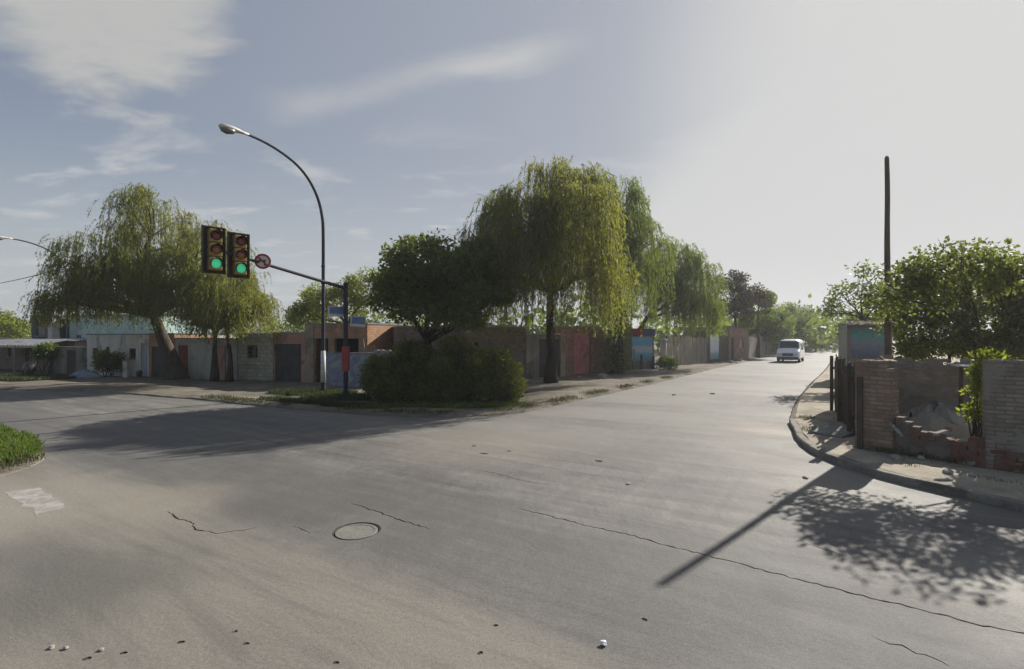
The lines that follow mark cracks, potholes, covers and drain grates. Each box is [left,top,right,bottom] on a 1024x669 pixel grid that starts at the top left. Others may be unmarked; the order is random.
manhole cover [332,522,381,540]
crack [355,504,430,529]
crack [875,637,947,665]
crack [167,511,256,534]
